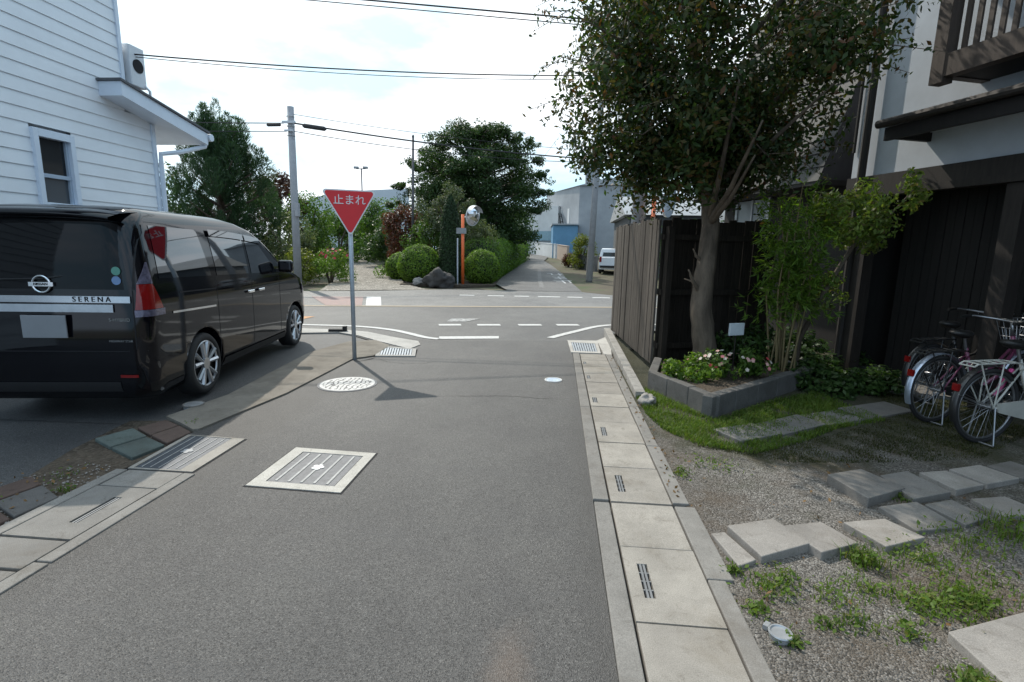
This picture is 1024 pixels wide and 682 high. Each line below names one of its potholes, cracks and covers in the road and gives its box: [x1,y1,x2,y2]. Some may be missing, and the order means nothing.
drain grate [568,341,601,354]
drain grate [375,346,416,357]
manhole cover [317,377,377,392]
